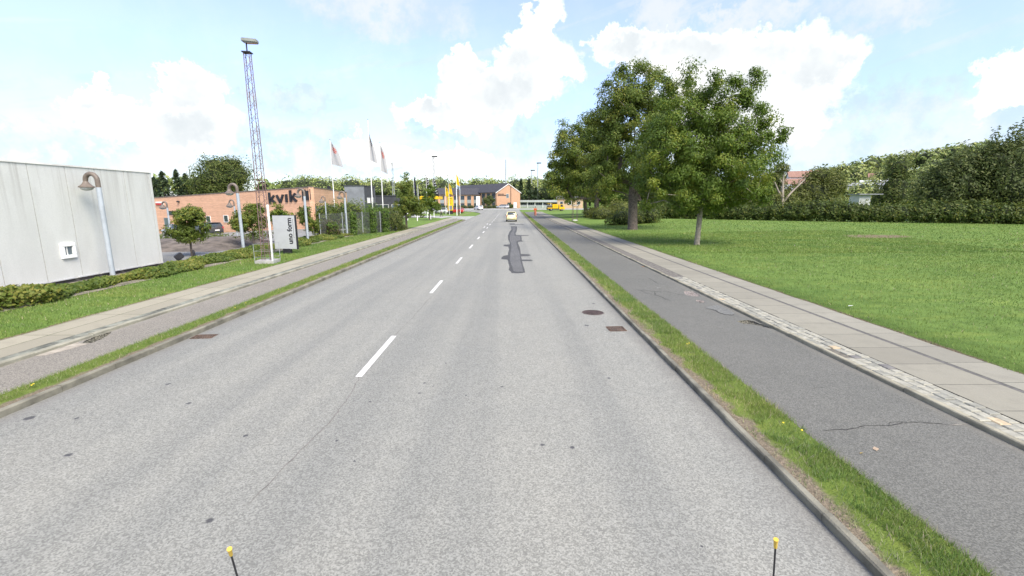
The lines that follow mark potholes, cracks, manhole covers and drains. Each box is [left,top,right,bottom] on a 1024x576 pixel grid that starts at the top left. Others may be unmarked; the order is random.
crack [831,421,962,430]
